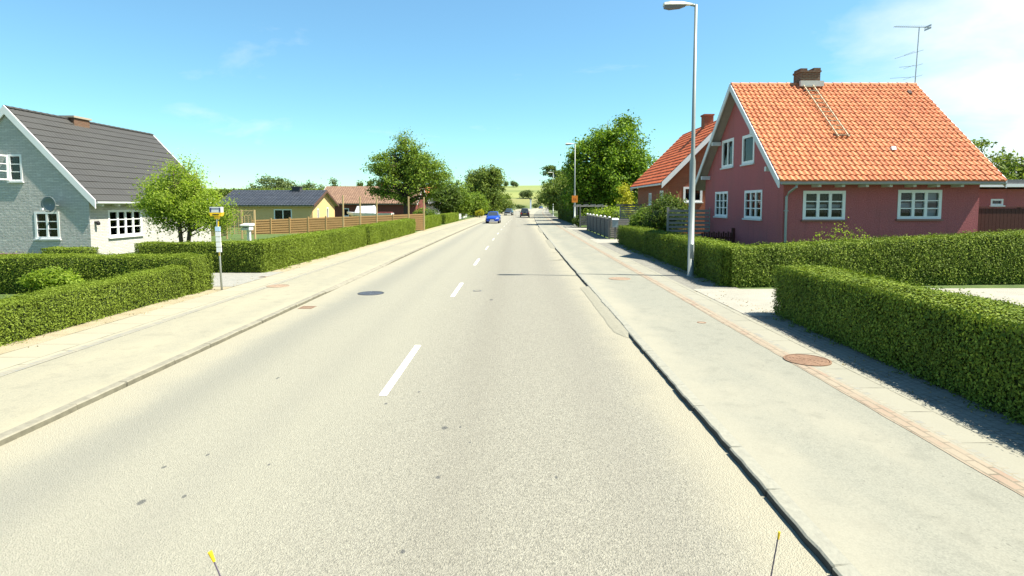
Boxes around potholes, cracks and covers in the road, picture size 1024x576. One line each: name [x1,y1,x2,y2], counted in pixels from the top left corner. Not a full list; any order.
manhole cover [783,354,832,367]
